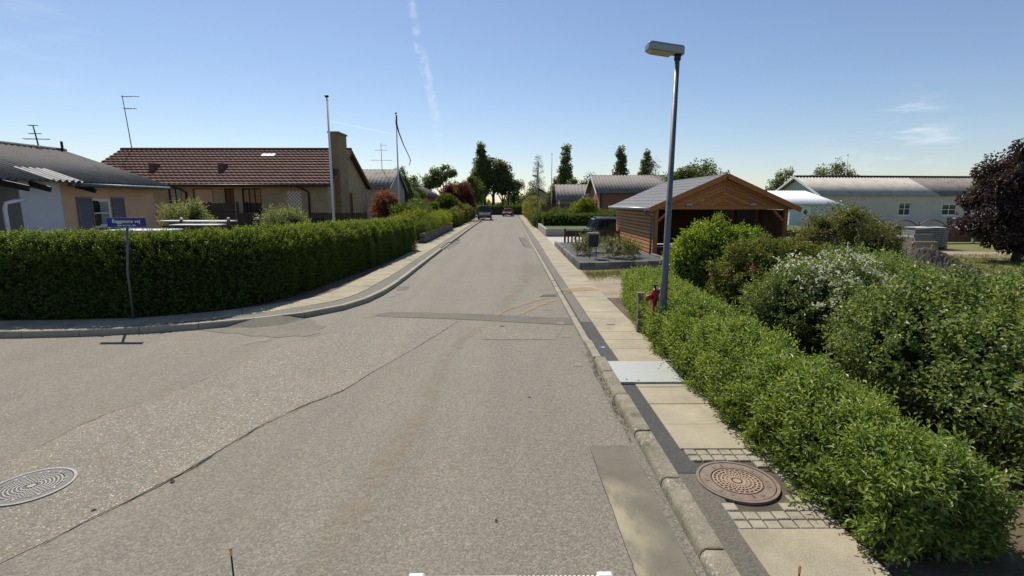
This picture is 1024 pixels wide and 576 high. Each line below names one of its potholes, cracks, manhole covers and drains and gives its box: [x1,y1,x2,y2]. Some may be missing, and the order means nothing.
manhole cover [696,461,781,505]
crack [127,455,214,502]
manhole cover [0,467,78,507]
